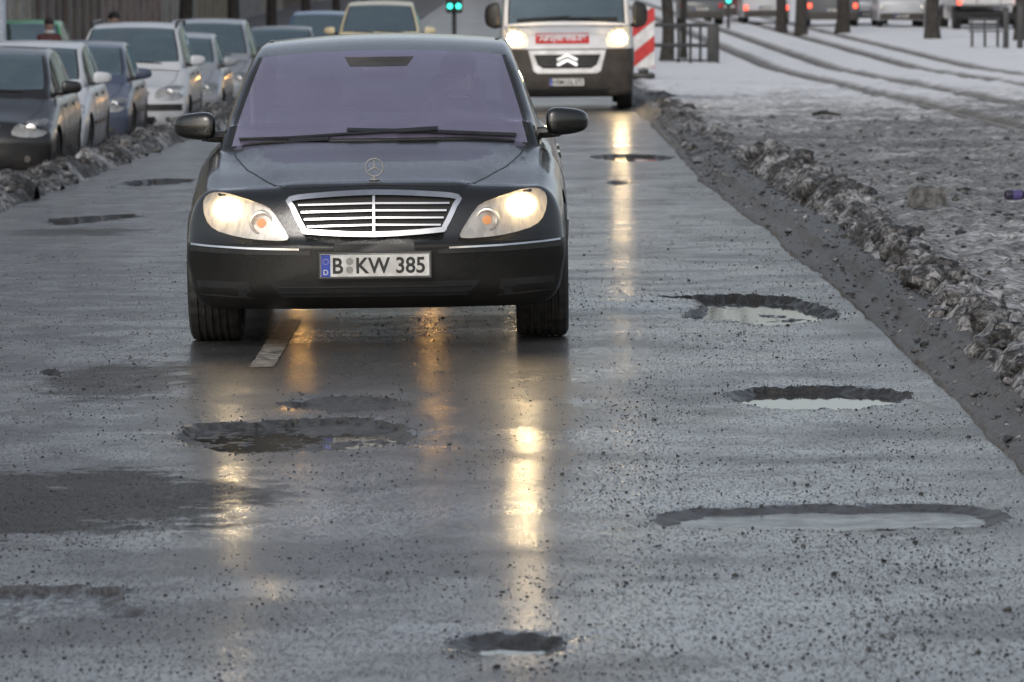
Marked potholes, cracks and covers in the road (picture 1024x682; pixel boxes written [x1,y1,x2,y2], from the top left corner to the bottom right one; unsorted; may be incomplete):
pothole [281,395,410,413]
pothole [177,417,416,454]
pothole [727,385,914,410]
pothole [448,631,568,658]
pothole [589,154,678,162]
pothole [659,293,840,326]
pothole [113,178,196,187]
pothole [649,503,1013,532]
pothole [40,214,144,225]
